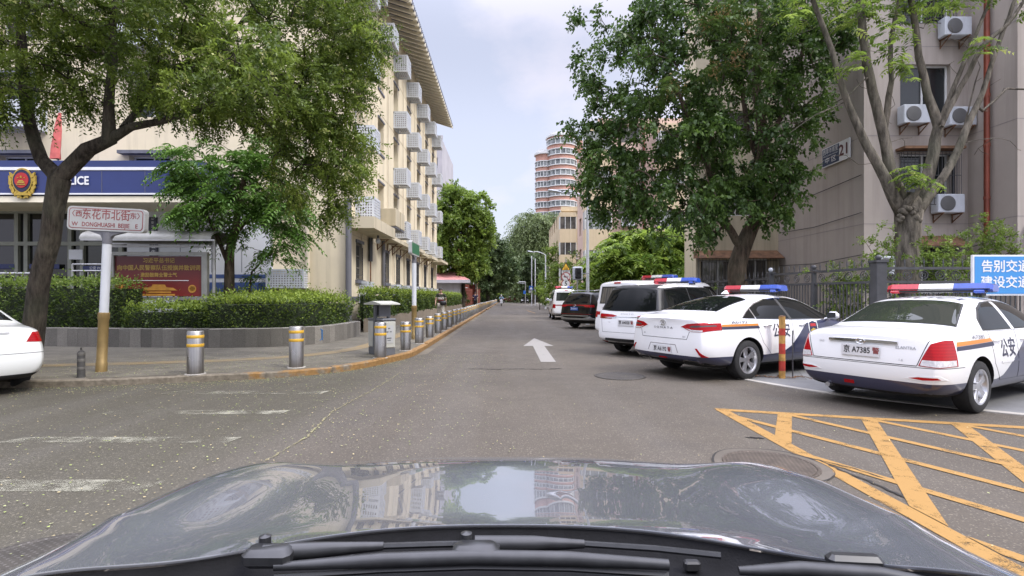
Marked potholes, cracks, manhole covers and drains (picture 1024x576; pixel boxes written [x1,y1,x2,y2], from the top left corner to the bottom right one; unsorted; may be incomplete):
manhole cover [594,372,646,380]
manhole cover [711,448,835,482]
